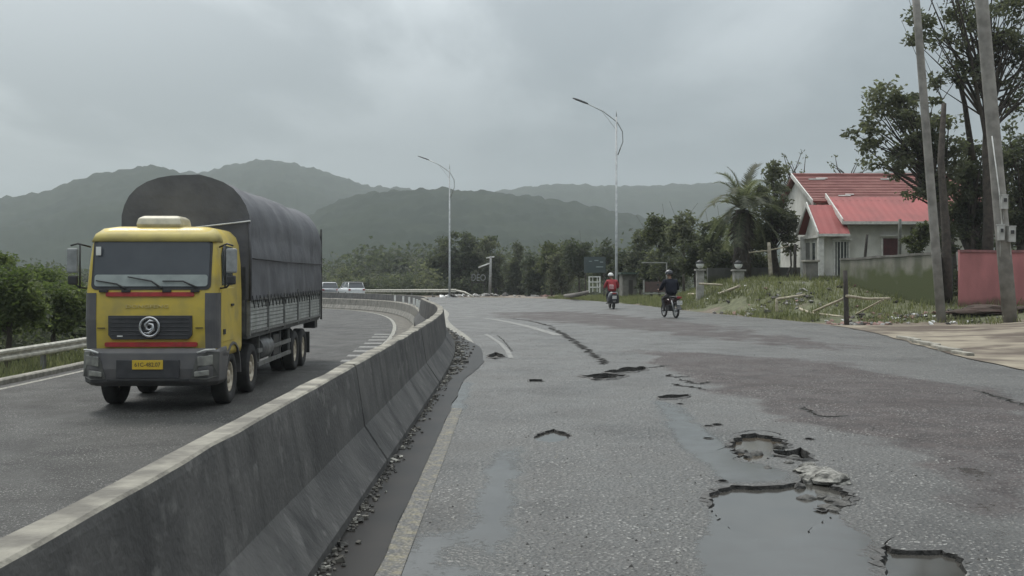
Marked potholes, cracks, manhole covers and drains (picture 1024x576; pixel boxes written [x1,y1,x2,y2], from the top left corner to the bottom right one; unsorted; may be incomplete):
crack [648,365,711,390]
crack [497,318,609,365]
crack [972,390,1024,406]
pothole [725,433,794,463]
crack [797,407,848,417]
pothole [699,478,860,540]
pothole [602,366,649,374]
pothole [534,429,572,442]
pothole [868,544,972,576]
